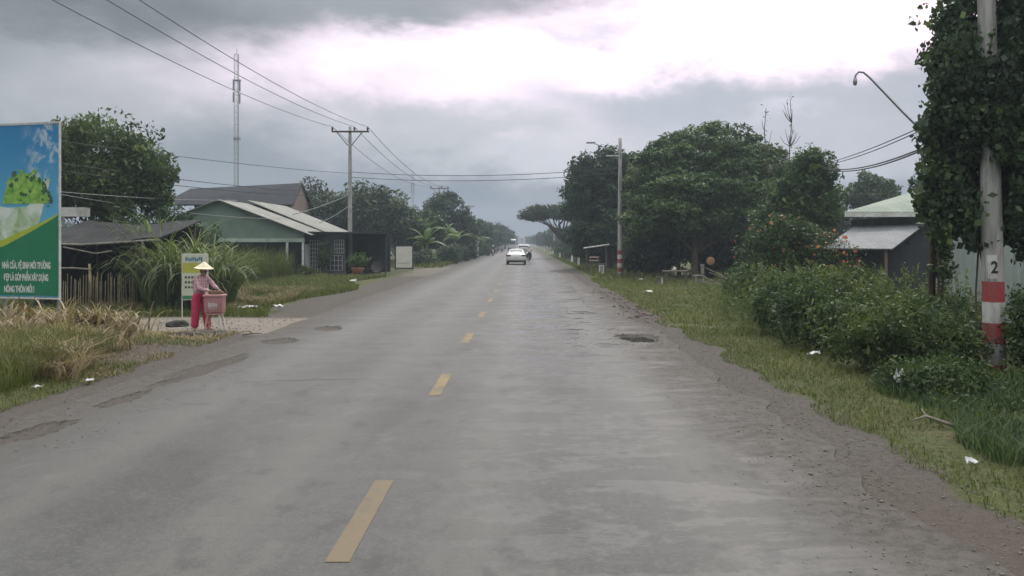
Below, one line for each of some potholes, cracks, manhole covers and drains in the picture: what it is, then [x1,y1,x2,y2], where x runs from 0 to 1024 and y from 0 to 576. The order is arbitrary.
pothole [259,337,300,345]
pothole [92,388,154,409]
pothole [0,419,83,445]
pothole [142,352,251,389]
pothole [613,334,659,343]
